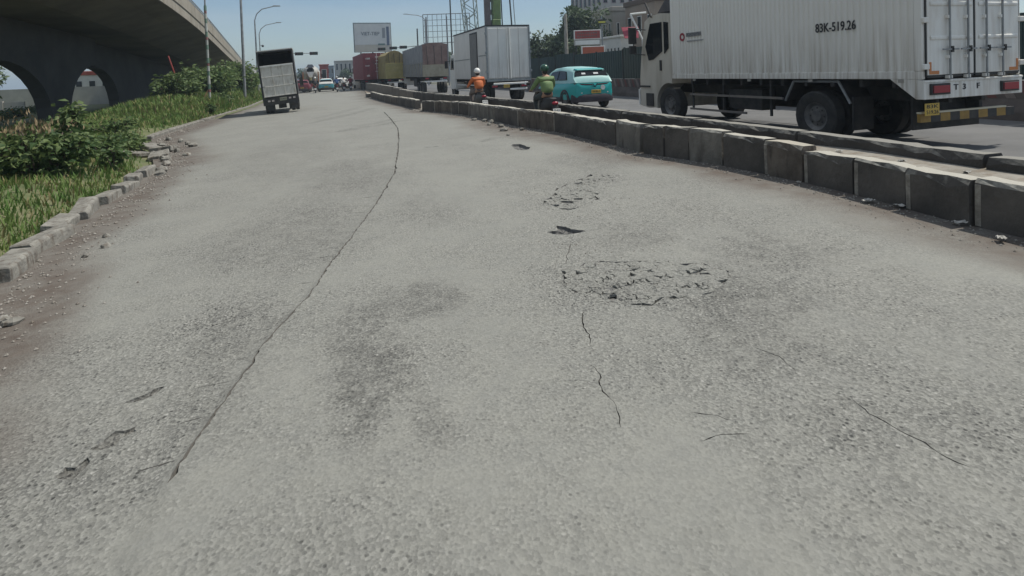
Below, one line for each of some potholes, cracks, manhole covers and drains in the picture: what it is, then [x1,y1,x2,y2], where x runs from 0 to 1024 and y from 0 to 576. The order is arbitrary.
crack [561,244,729,306]
crack [850,396,969,467]
crack [694,412,743,441]
crack [593,366,621,427]
pothole [548,226,583,235]
